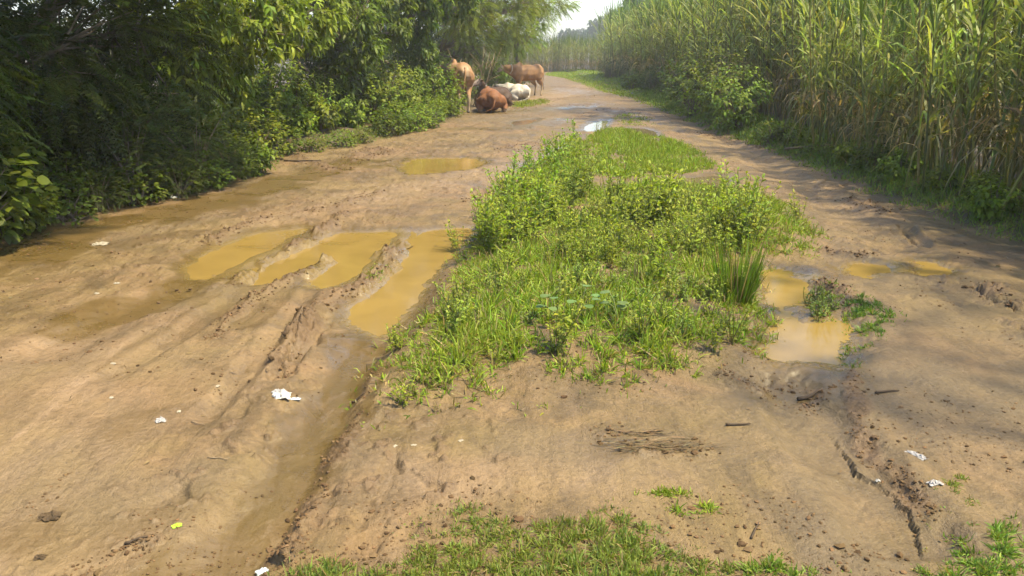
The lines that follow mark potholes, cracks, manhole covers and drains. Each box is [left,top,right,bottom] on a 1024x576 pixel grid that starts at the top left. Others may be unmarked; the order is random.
pothole [232,224,417,289]
pothole [394,153,490,175]
crack [818,429,929,563]
pothole [338,223,478,338]
pothole [746,264,864,367]
pothole [177,225,314,282]
